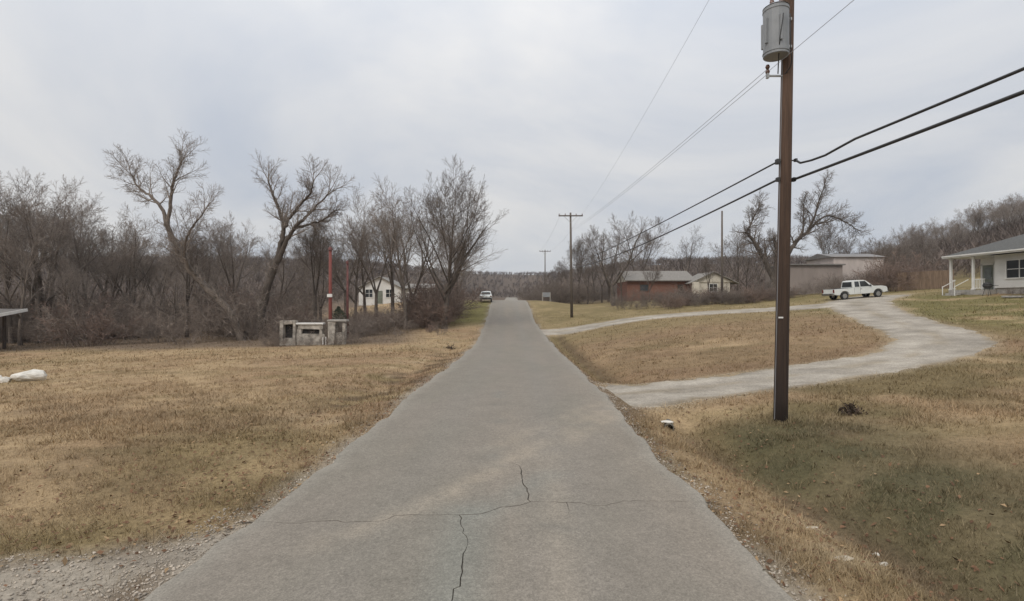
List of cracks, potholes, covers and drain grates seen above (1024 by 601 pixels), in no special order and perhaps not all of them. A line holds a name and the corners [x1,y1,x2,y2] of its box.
crack [242,462,710,601]
